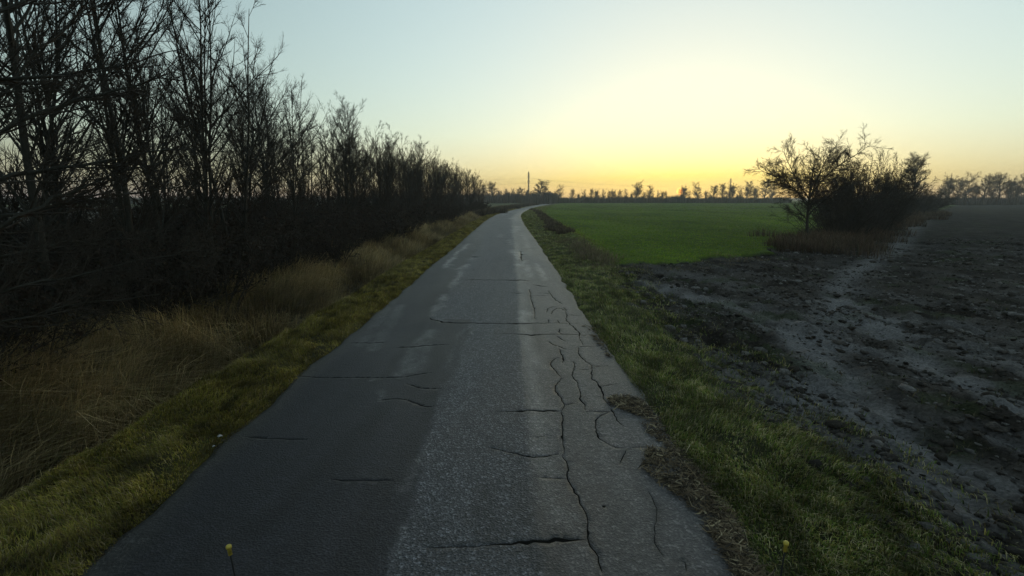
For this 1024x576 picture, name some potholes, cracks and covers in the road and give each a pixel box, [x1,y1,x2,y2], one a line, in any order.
crack [431,280,642,571]
